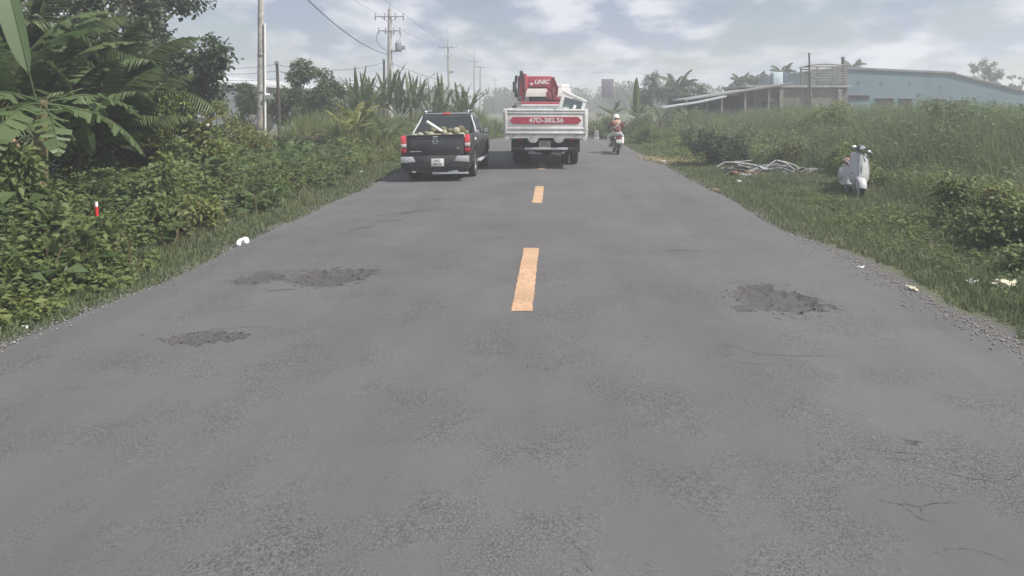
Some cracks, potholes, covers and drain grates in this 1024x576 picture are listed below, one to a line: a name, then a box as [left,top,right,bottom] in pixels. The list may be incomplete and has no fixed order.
pothole [224,270,292,286]
pothole [714,281,883,325]
pothole [140,329,253,347]
pothole [262,263,389,292]
crack [862,447,1022,491]
